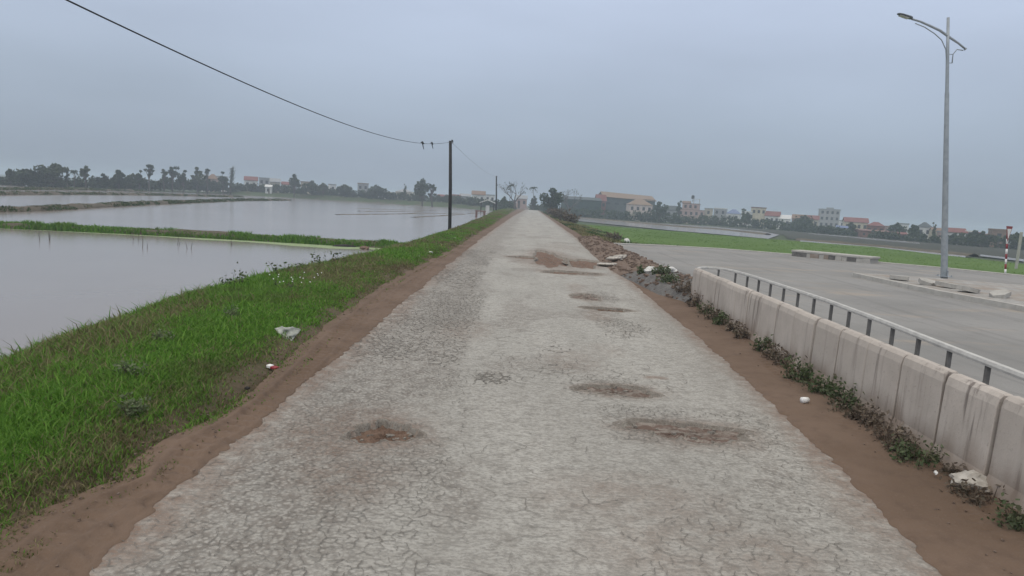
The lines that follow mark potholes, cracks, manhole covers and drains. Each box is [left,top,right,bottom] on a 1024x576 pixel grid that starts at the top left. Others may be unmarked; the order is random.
pothole [339,419,427,445]
pothole [533,249,570,269]
crack [92,362,479,576]
pothole [561,259,601,269]
pothole [568,293,602,302]
crack [473,325,802,454]
crack [426,399,934,576]
crack [346,247,495,367]
pothole [569,383,665,399]
crack [587,290,654,338]
pothole [612,417,755,445]
